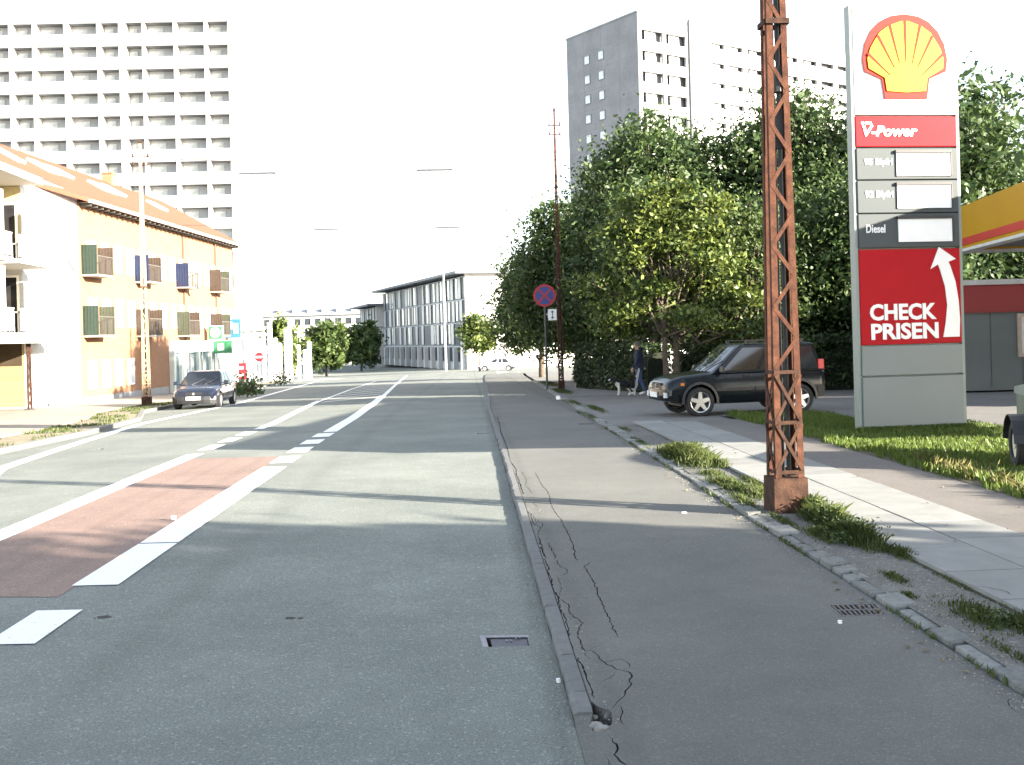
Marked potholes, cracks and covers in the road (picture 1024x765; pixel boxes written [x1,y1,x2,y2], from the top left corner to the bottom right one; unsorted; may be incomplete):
crack [497,417,645,765]
drain grate [827,603,887,617]
pothole [589,702,613,732]
